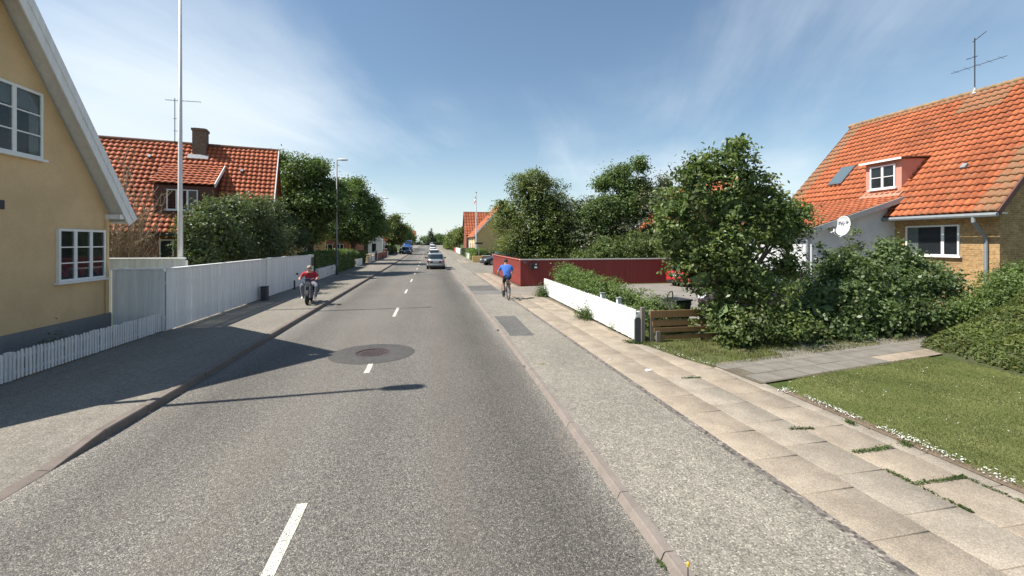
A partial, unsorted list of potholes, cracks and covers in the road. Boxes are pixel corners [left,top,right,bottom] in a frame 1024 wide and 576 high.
manhole cover [355,348,390,357]
